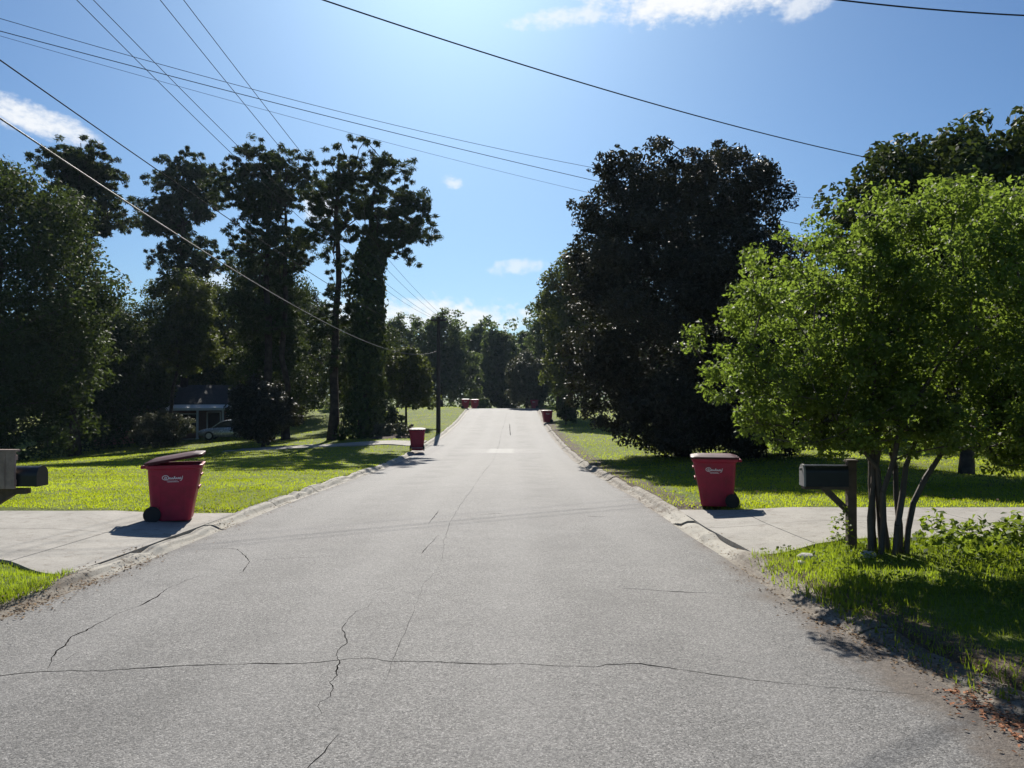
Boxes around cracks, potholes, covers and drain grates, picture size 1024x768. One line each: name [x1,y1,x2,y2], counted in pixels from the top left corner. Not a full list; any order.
crack [0,576,915,714]
